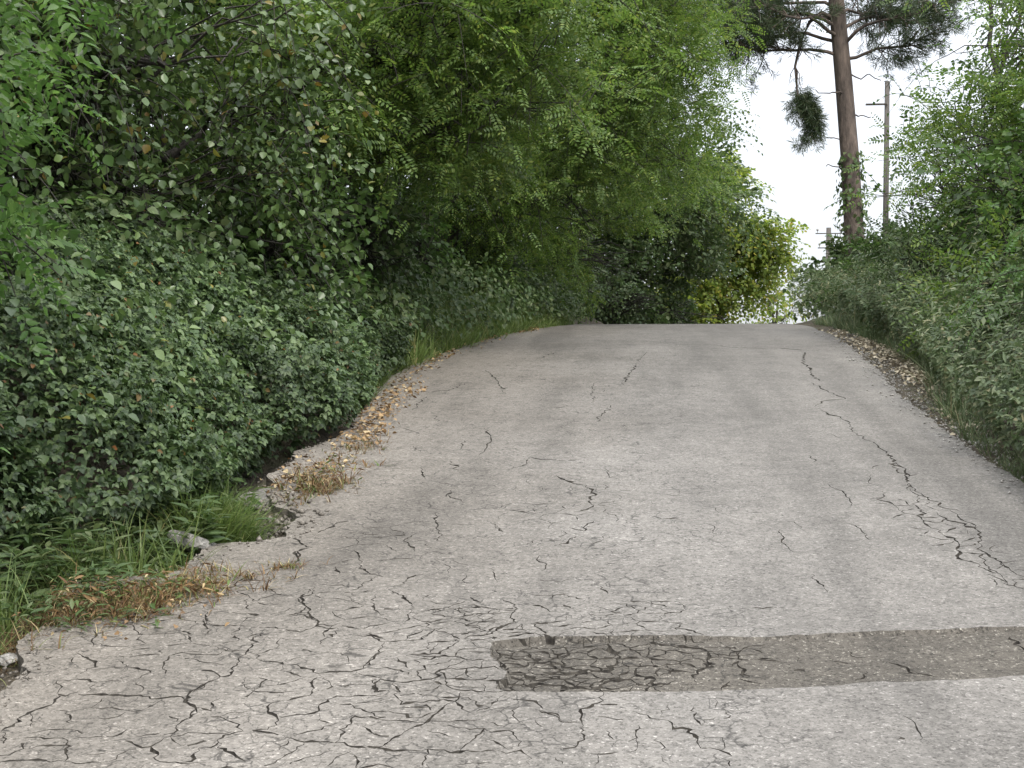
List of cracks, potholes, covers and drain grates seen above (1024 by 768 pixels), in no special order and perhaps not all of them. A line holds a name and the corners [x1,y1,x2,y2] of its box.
crack [880,660,937,677]
crack [0,384,868,768]
crack [813,384,1024,589]
